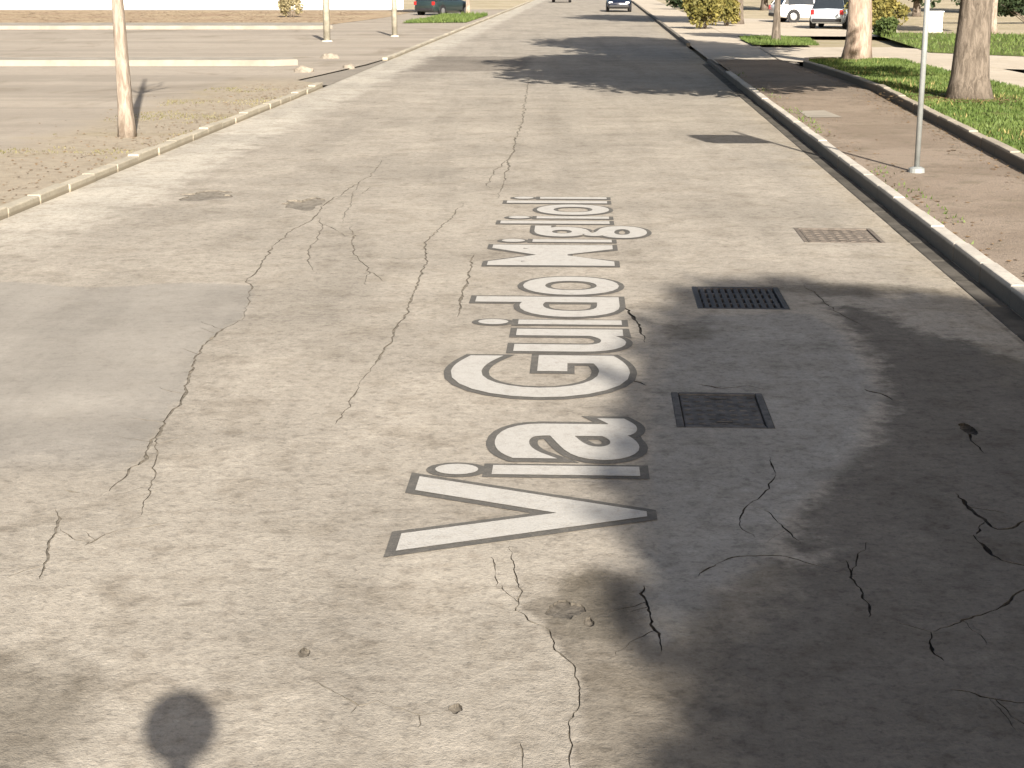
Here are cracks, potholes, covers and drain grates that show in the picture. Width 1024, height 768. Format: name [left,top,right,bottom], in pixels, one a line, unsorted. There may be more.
crack [491,549,580,768]
pothole [545,600,586,619]
crack [699,459,829,575]
pothole [179,191,233,201]
crack [951,689,1024,729]
drain grate [692,286,790,309]
pothole [282,197,325,211]
crack [957,494,1024,566]
crack [900,589,1024,661]
crack [9,157,474,579]
crack [846,541,871,617]
